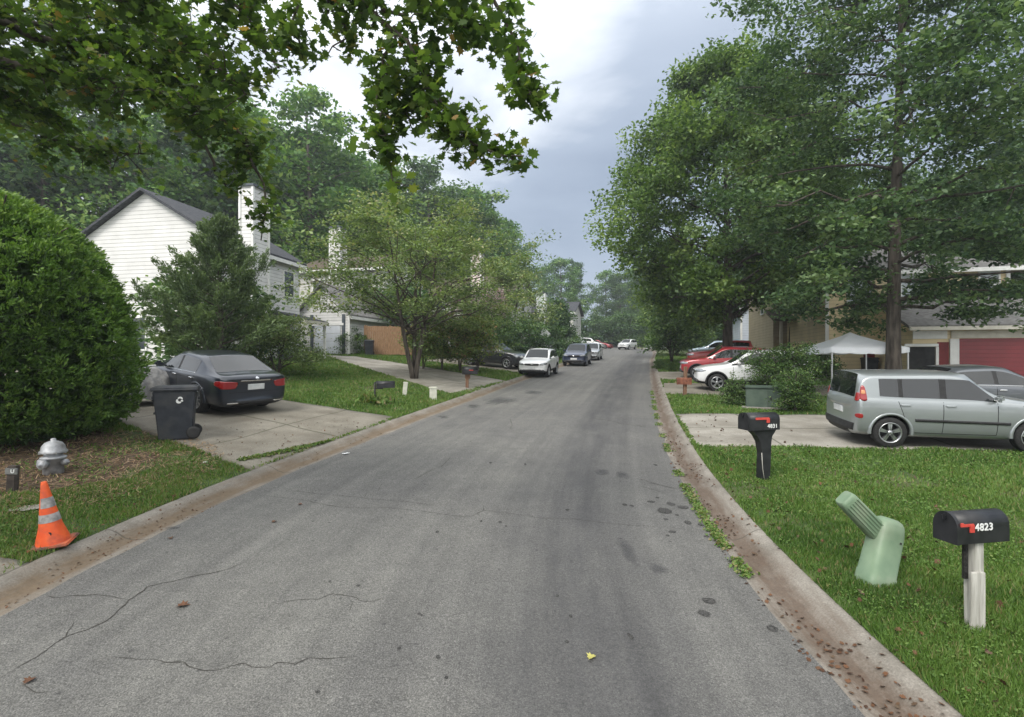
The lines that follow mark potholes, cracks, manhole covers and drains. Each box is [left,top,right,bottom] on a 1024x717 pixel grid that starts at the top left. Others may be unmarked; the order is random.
crack [5,559,248,675]
crack [155,657,358,671]
